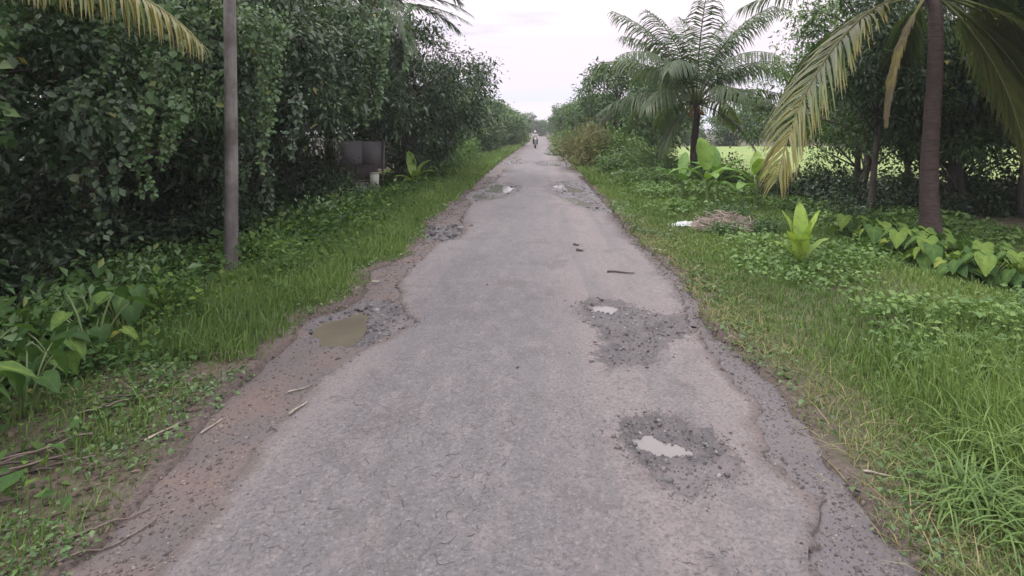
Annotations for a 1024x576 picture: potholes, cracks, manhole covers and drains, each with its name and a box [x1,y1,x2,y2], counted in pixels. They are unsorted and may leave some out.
pothole [466,183,518,202]
pothole [579,298,698,368]
pothole [302,298,415,350]
pothole [546,180,612,212]
pothole [611,411,741,504]
pothole [425,224,464,242]
